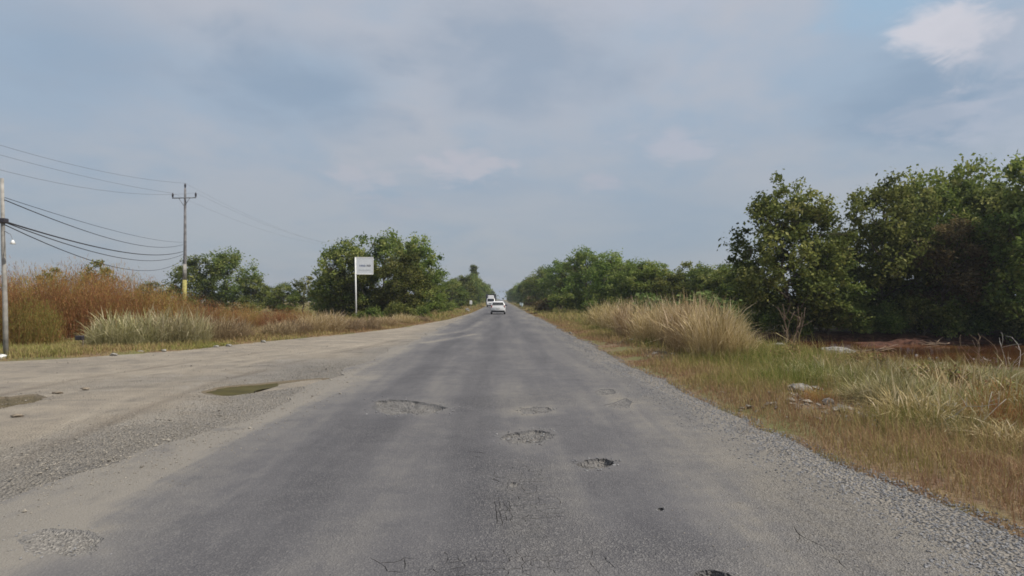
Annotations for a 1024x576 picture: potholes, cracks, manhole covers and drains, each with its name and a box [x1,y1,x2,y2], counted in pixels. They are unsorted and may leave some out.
pothole [493,427,556,446]
pothole [572,457,621,471]
pothole [595,388,620,397]
pothole [600,397,636,409]
crack [493,466,561,524]
crack [375,549,615,576]
pothole [688,567,738,576]
pothole [364,396,460,417]
pothole [517,406,557,415]
